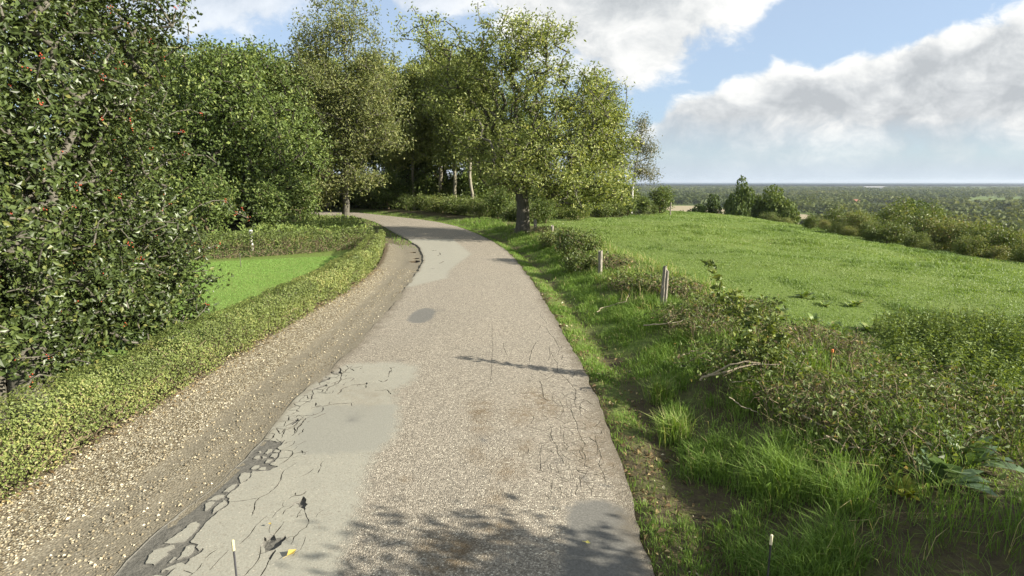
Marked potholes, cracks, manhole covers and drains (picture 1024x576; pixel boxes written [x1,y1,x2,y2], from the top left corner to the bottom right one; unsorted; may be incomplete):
crack [183,366,361,576]
crack [520,314,629,503]
